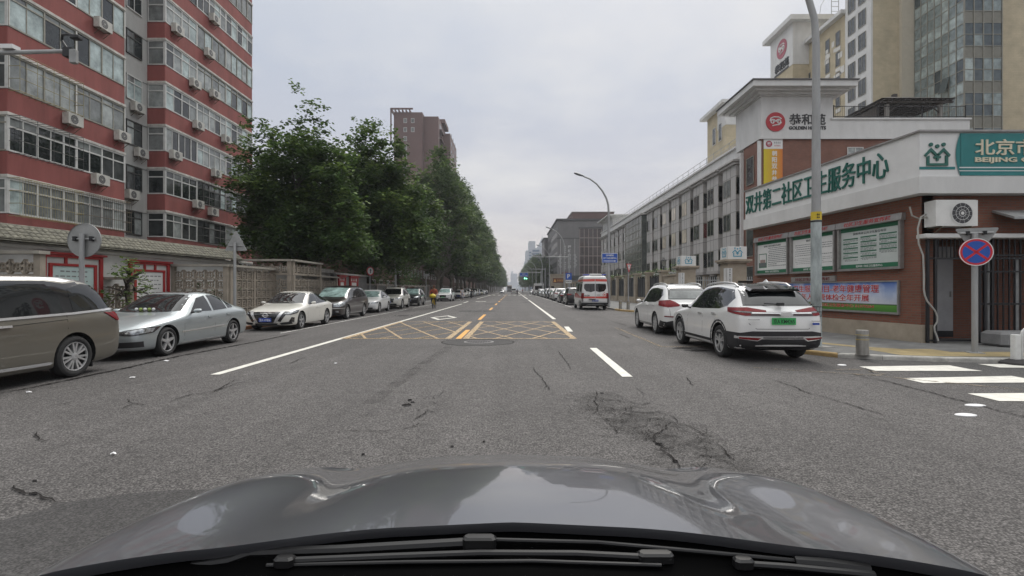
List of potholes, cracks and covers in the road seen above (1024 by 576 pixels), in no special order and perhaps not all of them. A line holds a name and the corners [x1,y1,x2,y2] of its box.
crack [593,387,732,468]
crack [12,485,56,502]
